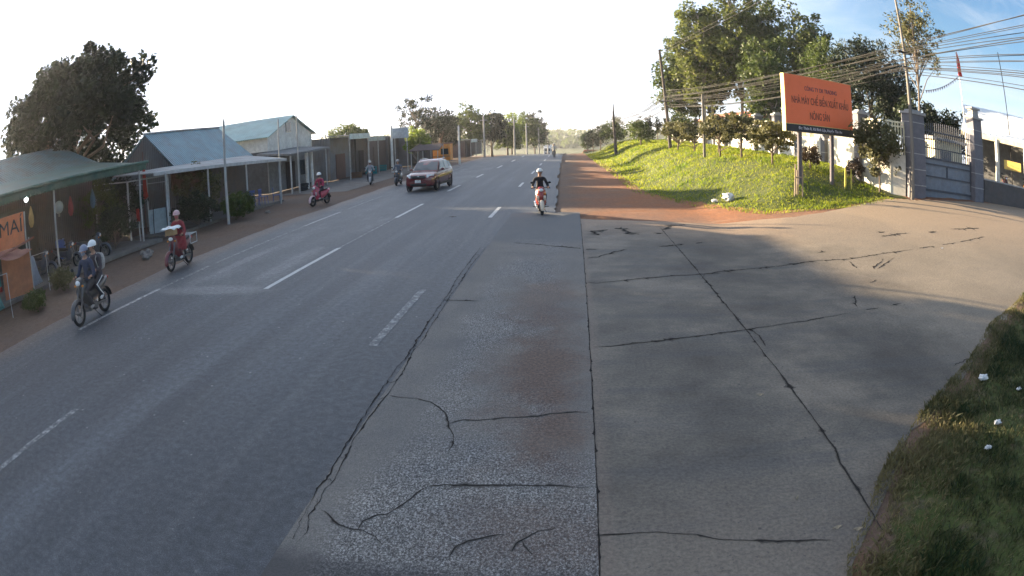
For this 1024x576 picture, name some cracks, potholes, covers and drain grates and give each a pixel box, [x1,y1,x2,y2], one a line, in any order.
crack [293,248,588,545]
crack [589,227,982,347]
crack [522,224,702,258]
